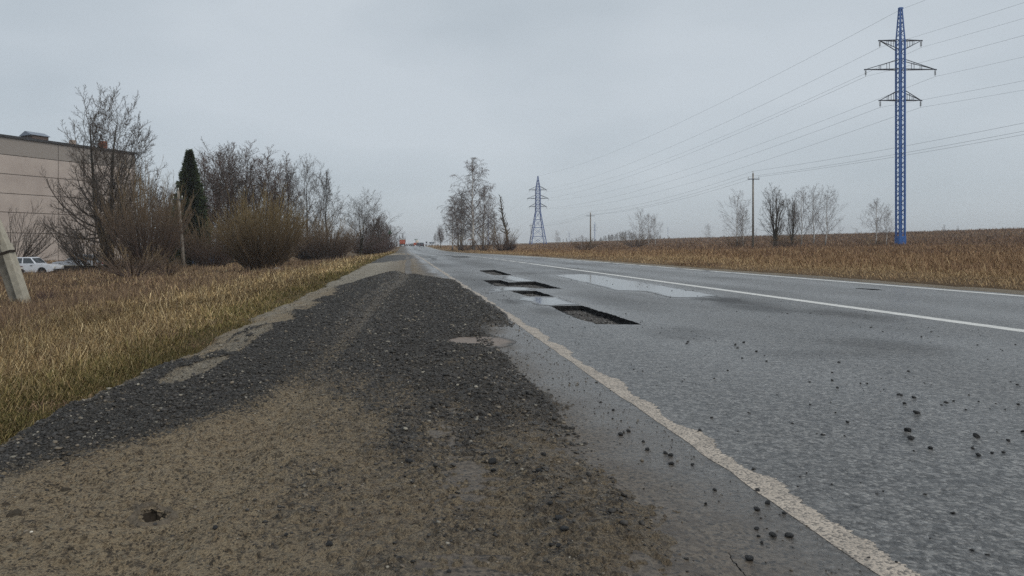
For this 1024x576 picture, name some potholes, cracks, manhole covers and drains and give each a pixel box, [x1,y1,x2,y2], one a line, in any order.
pothole [551,306,641,325]
pothole [483,280,562,289]
pothole [126,501,179,526]
